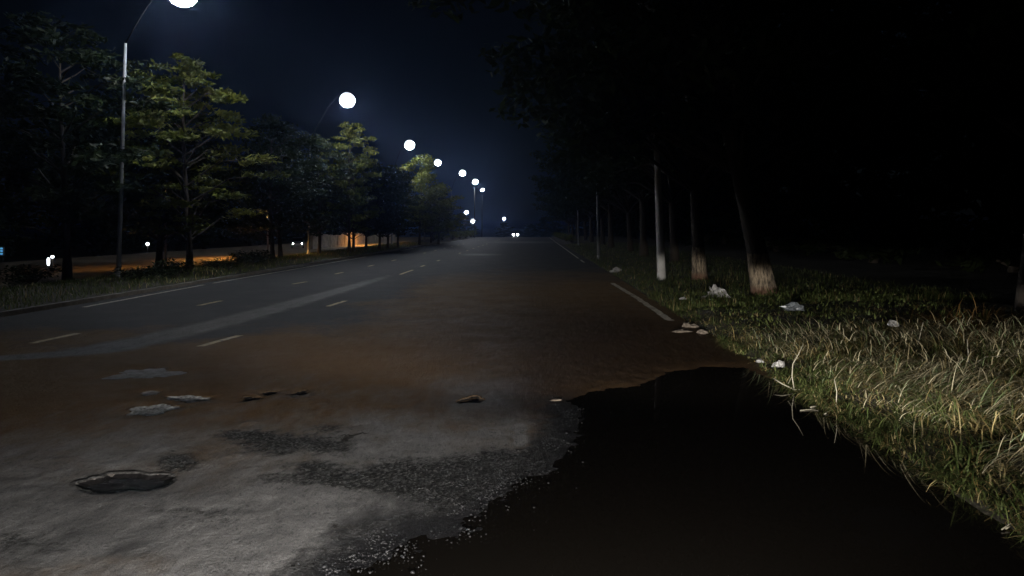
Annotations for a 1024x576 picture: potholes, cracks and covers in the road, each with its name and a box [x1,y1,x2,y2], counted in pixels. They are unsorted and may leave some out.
pothole [69,471,178,494]
